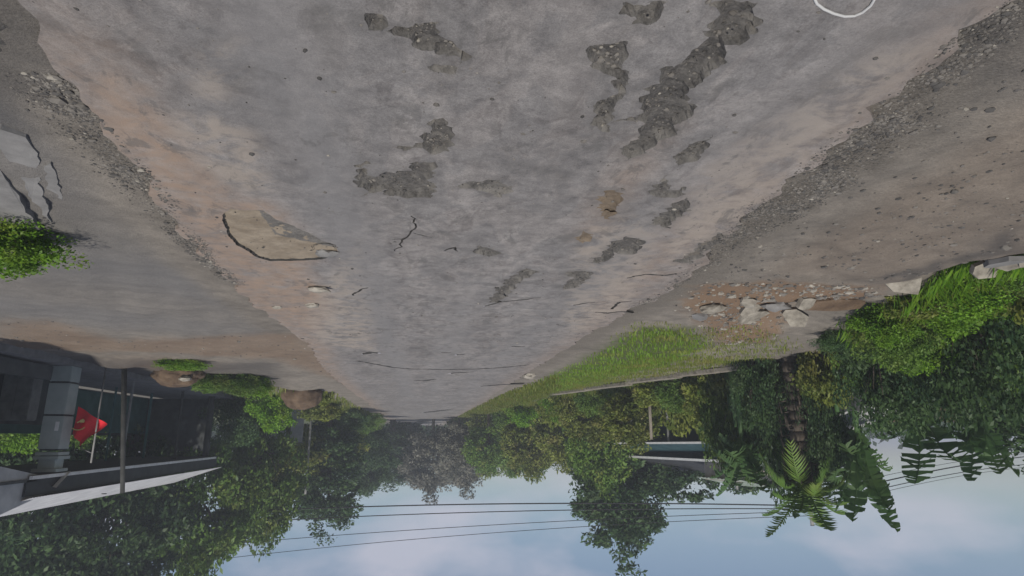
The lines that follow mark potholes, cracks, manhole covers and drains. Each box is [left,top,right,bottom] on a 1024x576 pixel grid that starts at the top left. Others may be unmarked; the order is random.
pothole [364,13,472,64]
pothole [488,268,539,303]
pothole [394,118,455,155]
pothole [648,175,687,198]
pothole [612,0,763,160]
pothole [673,135,713,166]
pothole [586,41,630,132]
pothole [562,270,594,290]
pothole [353,161,438,198]
pothole [589,236,646,264]
crack [394,216,457,251]
crack [358,351,526,386]
